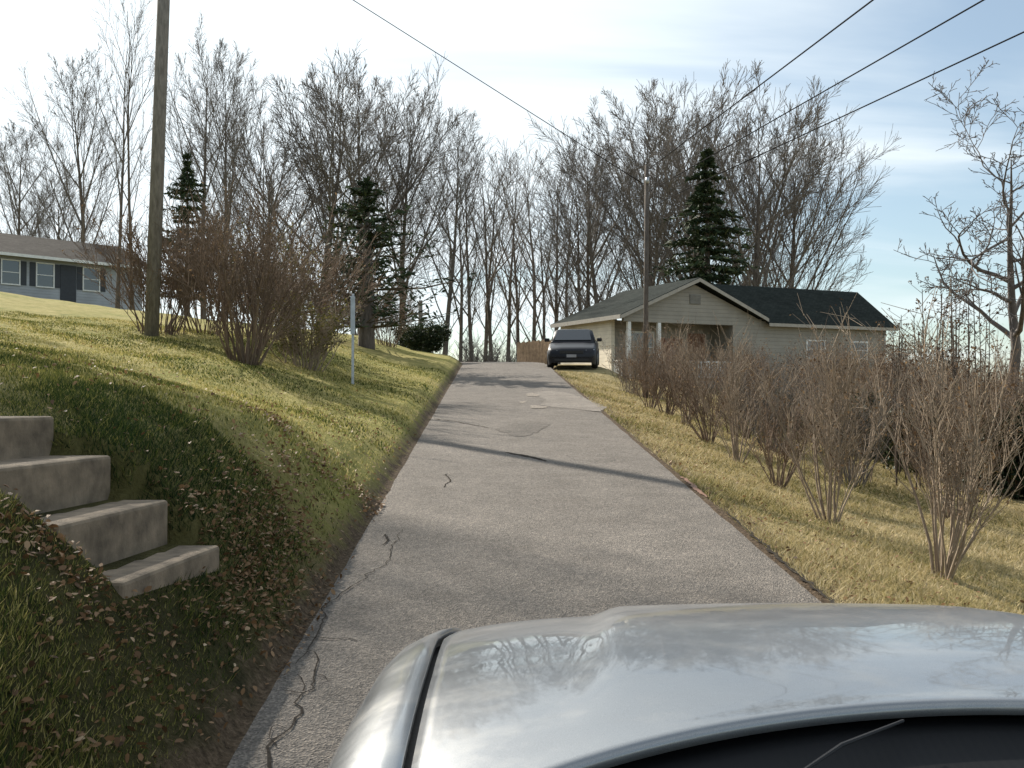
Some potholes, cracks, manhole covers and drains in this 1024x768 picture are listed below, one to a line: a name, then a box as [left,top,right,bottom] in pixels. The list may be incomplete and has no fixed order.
crack [266,531,402,768]
crack [507,452,546,461]
